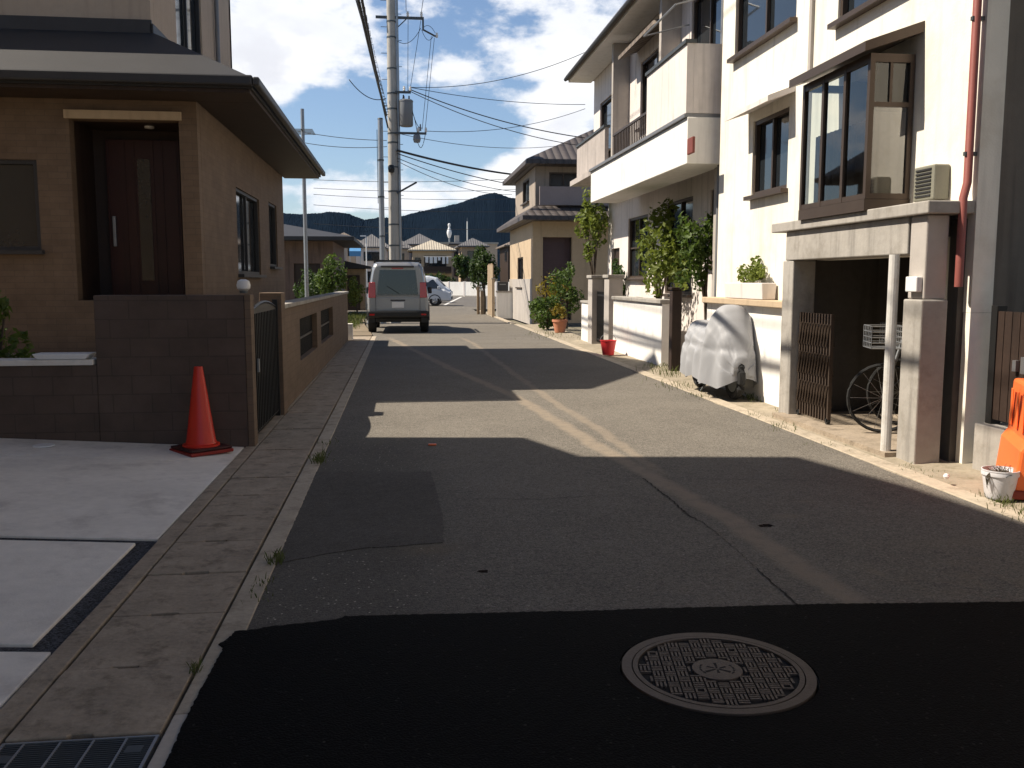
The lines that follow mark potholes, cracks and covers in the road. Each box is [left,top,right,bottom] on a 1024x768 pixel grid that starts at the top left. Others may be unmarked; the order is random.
crack [643,478,797,604]
manhole cover [622,633,817,716]
drain grate [0,734,160,768]
